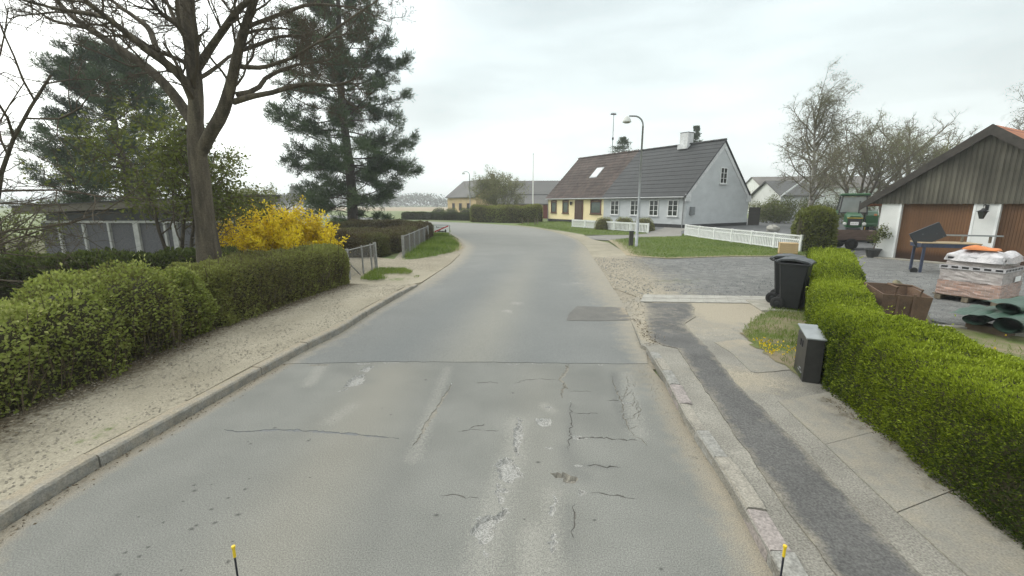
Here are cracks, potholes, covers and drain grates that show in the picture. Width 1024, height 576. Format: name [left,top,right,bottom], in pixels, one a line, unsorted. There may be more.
pothole [342,374,365,388]
crack [518,365,647,448]
pothole [551,472,578,484]
pothole [513,417,524,456]
pothole [470,507,510,545]
pothole [491,457,525,484]
